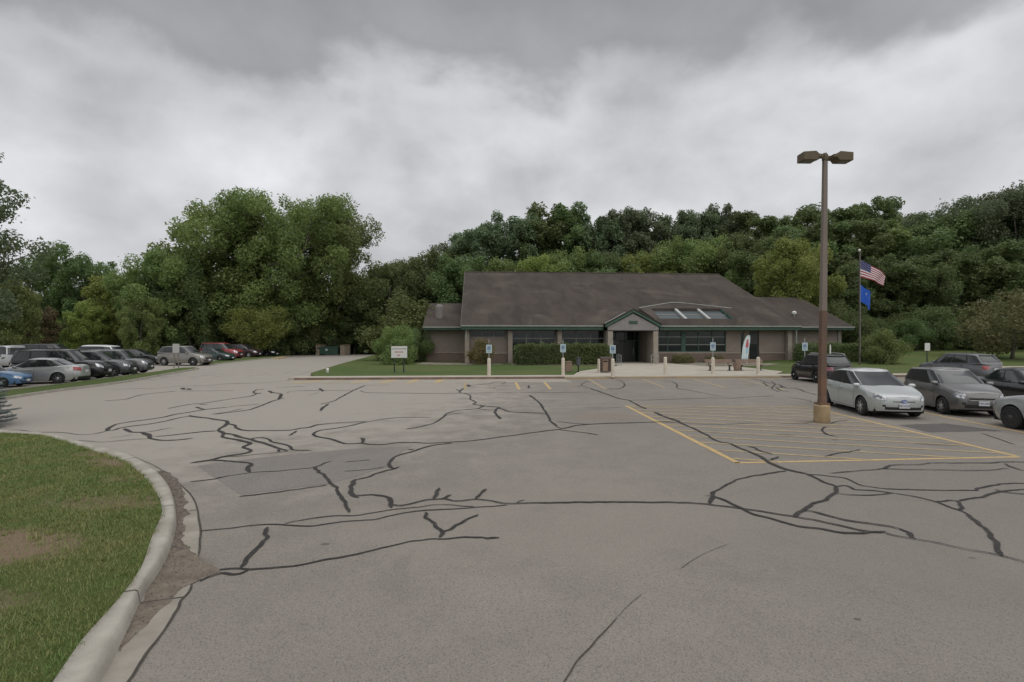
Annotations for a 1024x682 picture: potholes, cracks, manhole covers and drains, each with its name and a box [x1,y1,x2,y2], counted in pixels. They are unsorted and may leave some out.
crack [202,504,503,567]
crack [107,381,279,401]
crack [563,592,644,682]
crack [757,379,816,402]
